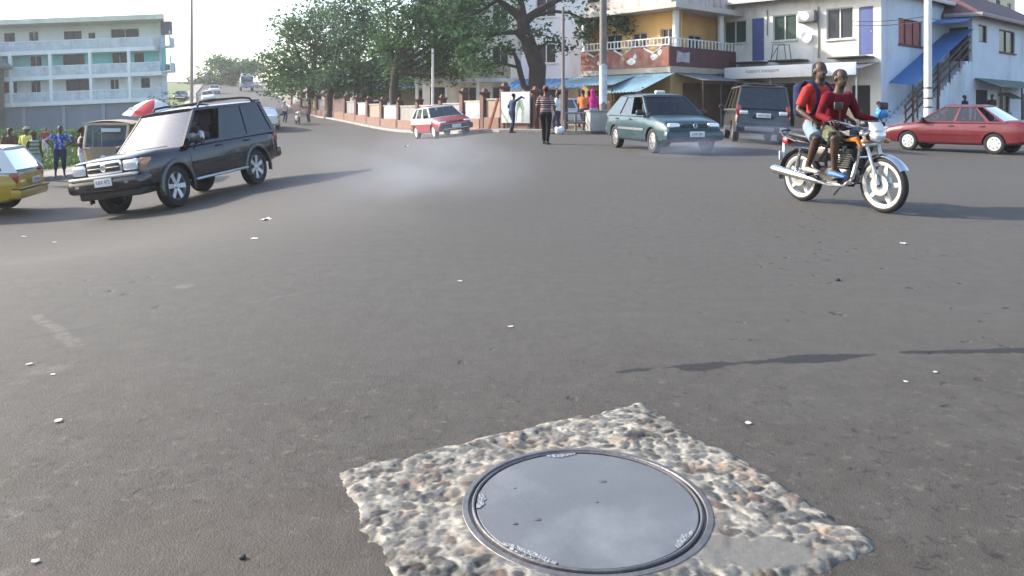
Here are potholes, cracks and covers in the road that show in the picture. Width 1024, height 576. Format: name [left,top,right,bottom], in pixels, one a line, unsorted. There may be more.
manhole cover [462,448,714,576]
